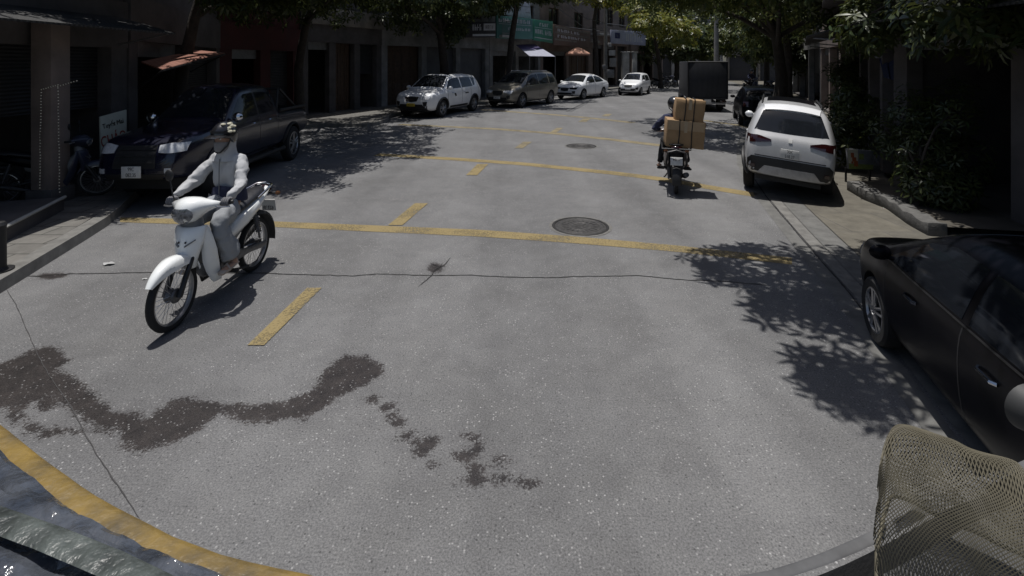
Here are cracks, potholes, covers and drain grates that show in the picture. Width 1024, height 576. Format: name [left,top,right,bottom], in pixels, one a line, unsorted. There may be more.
manhole cover [549,216,612,237]
crack [6,289,139,517]
crack [36,257,764,286]
